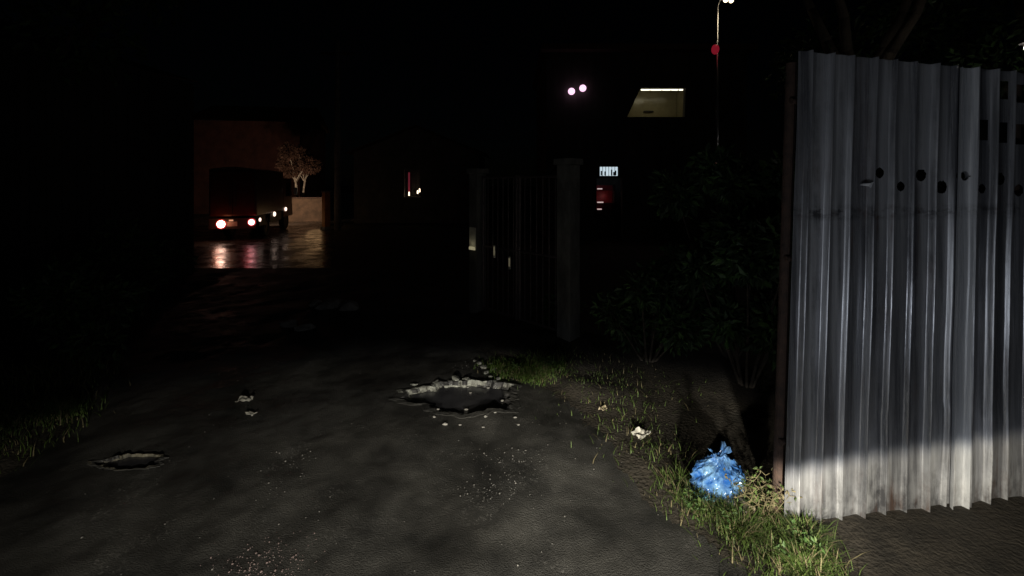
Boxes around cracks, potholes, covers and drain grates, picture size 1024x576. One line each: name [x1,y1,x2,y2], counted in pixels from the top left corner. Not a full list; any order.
pothole [87,453,170,471]
pothole [388,379,523,419]
